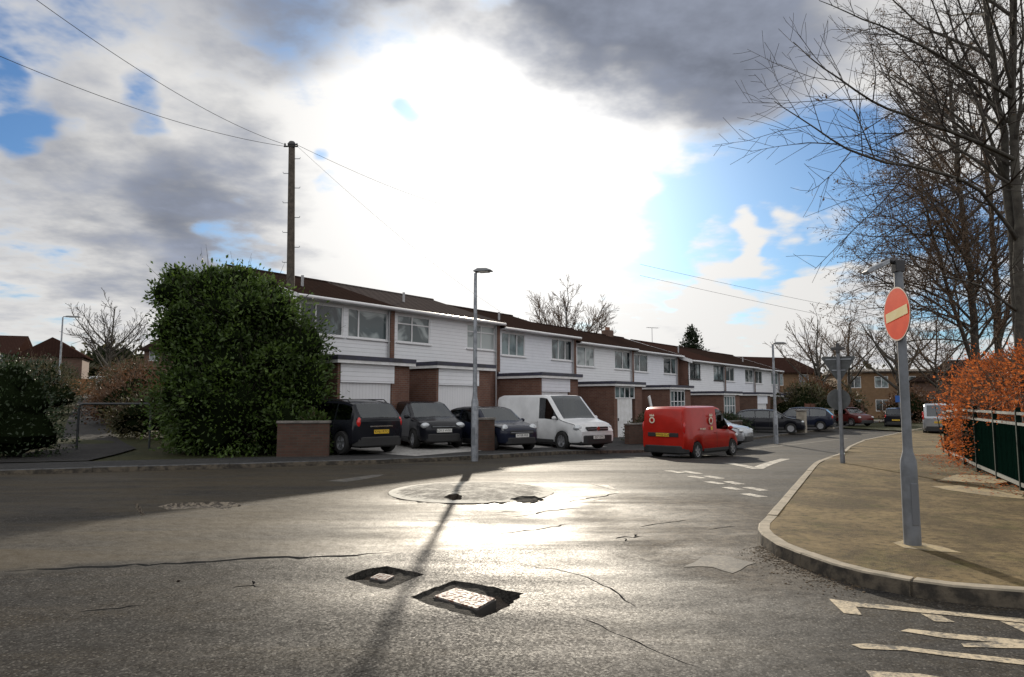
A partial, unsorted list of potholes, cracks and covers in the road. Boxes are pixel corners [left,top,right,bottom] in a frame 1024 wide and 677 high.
crack [76,605,140,613]
manhole cover [370,573,395,583]
manhole cover [433,588,496,616]
crack [527,565,696,667]
crack [482,493,617,534]
pothole [346,566,423,589]
crack [616,520,685,541]
pothole [411,580,524,618]
